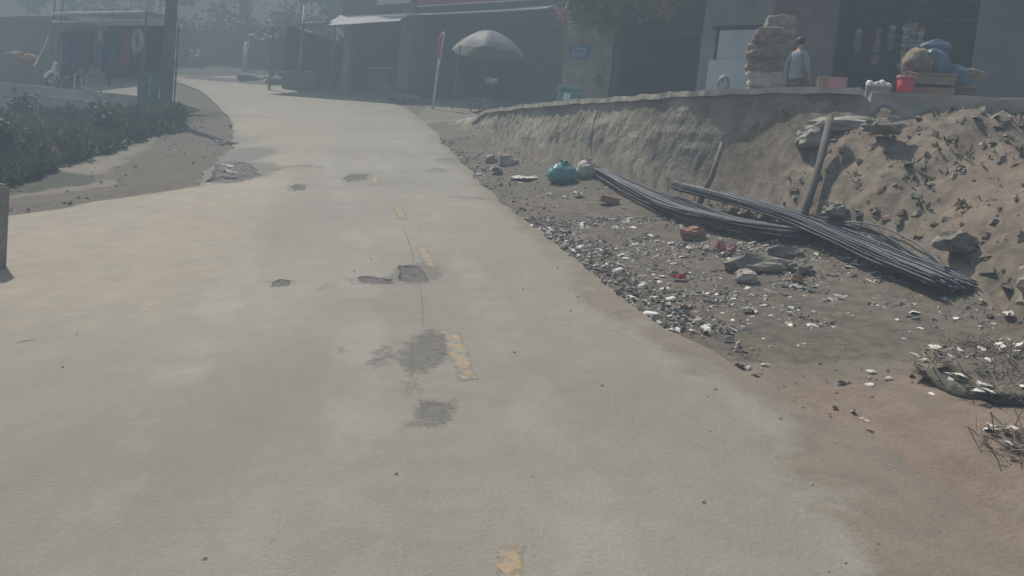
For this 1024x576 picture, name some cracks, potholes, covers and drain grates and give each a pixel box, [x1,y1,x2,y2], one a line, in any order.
pothole [271,279,291,287]
crack [410,286,452,425]
pothole [205,162,262,184]
pothole [357,276,393,285]
pothole [342,173,368,182]
pothole [397,265,429,283]
